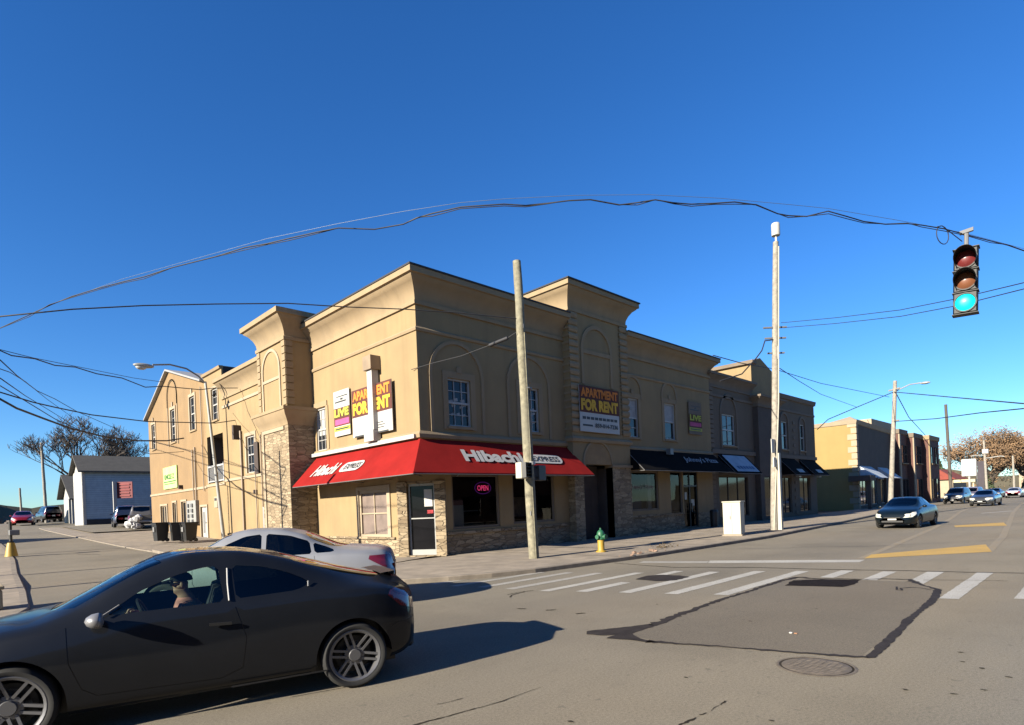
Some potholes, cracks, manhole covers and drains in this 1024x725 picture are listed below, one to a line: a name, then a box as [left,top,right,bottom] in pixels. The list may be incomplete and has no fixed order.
manhole cover [776,657,858,677]
crack [413,686,543,725]
